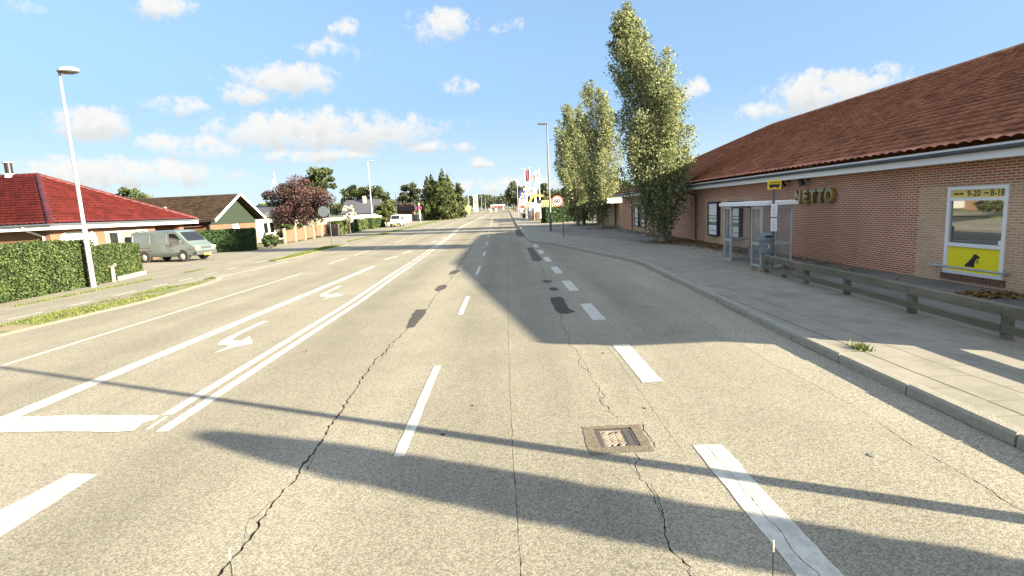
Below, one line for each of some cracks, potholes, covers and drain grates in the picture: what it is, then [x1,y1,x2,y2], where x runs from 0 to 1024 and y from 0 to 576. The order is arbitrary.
drain grate [582,424,654,461]
crack [610,351,691,576]
crack [560,315,618,420]
crack [216,237,477,576]
